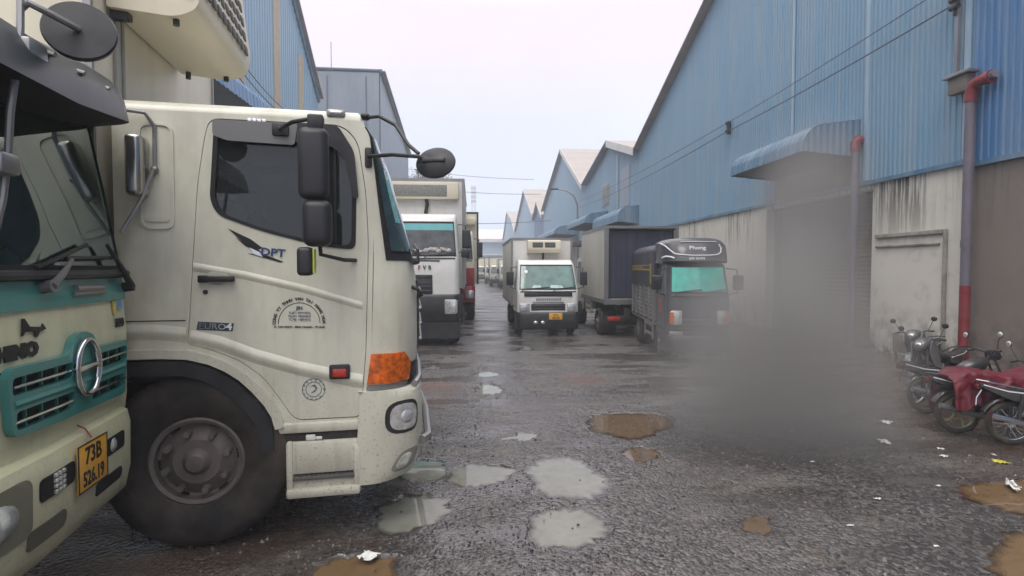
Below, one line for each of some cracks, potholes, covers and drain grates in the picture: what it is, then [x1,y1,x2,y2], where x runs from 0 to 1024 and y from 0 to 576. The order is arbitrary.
pothole [950,476,1024,516]
pothole [495,431,541,441]
pothole [620,445,664,464]
pothole [473,382,506,395]
pothole [371,492,457,536]
pothole [304,550,403,576]
pothole [397,458,452,482]
pothole [518,454,615,503]
pothole [585,412,677,441]
pothole [445,462,522,488]
pothole [525,505,615,551]
pothole [739,514,776,537]
